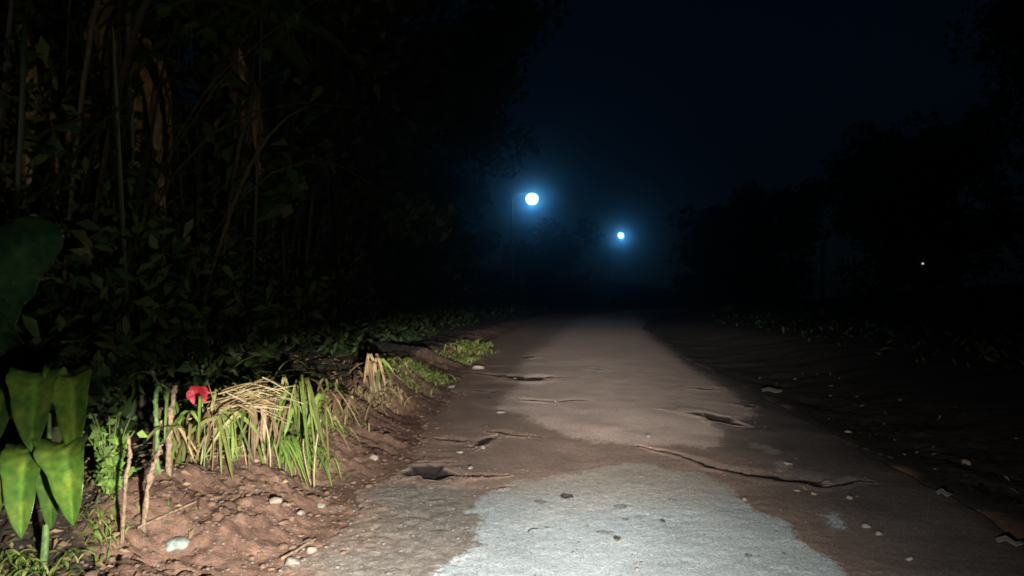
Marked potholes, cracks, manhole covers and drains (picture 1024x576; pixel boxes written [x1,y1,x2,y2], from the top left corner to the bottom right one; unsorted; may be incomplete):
crack [387,408,888,499]
pothole [675,409,754,428]
pothole [395,462,465,482]
